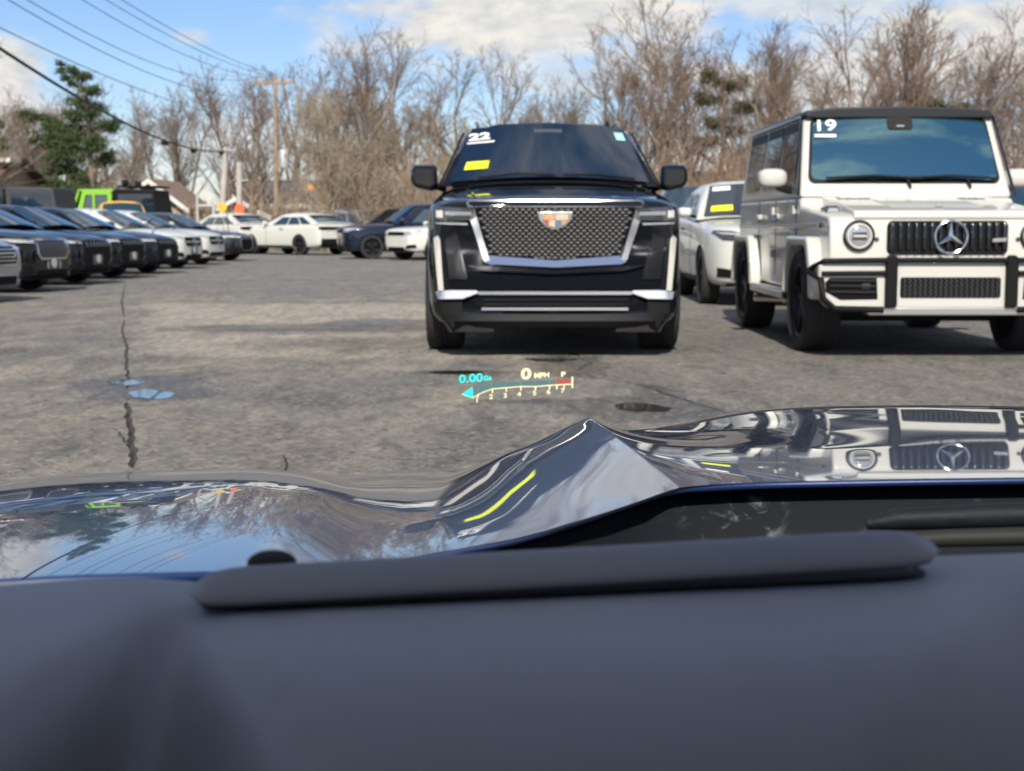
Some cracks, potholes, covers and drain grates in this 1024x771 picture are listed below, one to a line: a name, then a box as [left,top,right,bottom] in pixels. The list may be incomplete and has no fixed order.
crack [537,359,727,414]
pothole [615,402,672,413]
crack [95,286,162,468]
